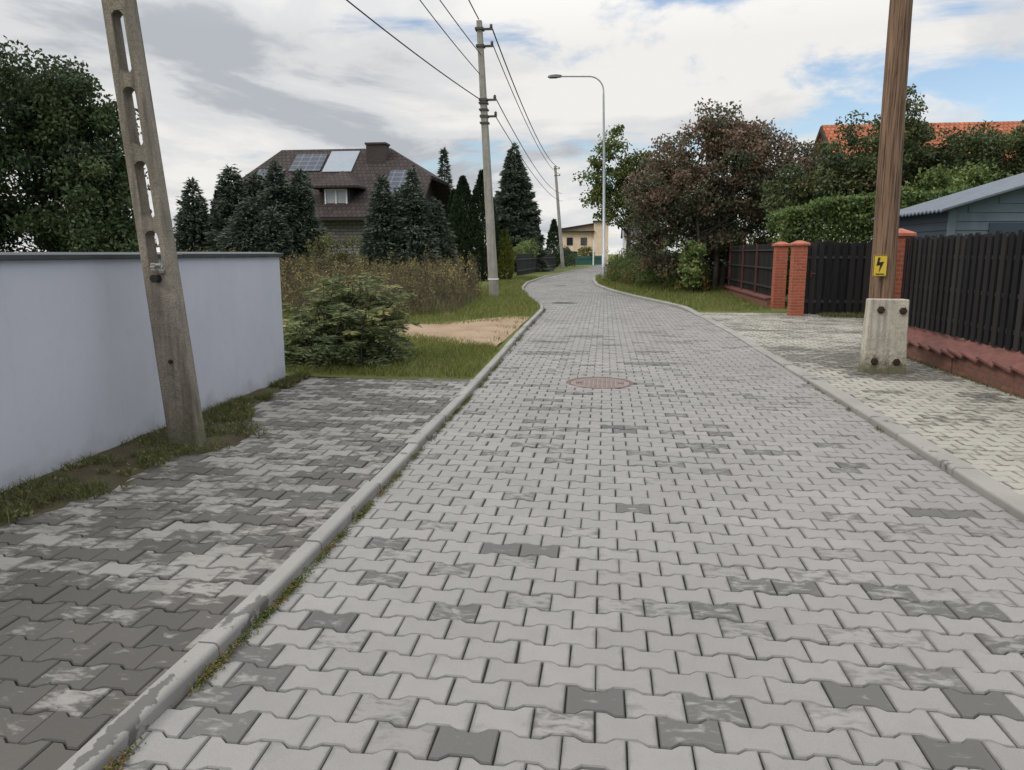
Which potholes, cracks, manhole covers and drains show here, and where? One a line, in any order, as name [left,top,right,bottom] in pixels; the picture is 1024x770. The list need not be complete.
manhole cover [566,377,634,389]
